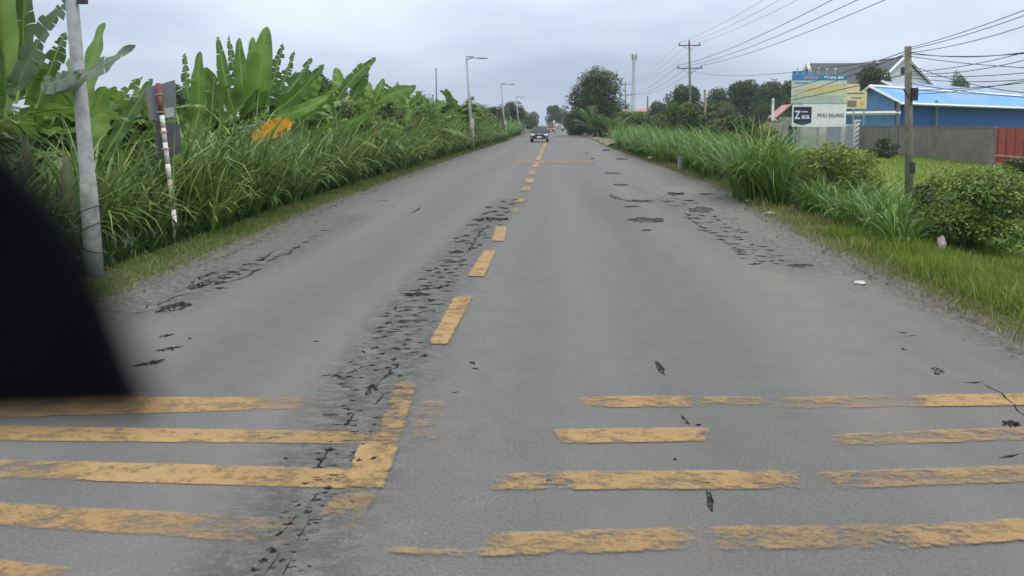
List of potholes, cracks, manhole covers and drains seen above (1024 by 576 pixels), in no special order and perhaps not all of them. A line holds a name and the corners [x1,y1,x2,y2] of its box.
crack [137,230,327,309]
crack [964,382,1024,415]
